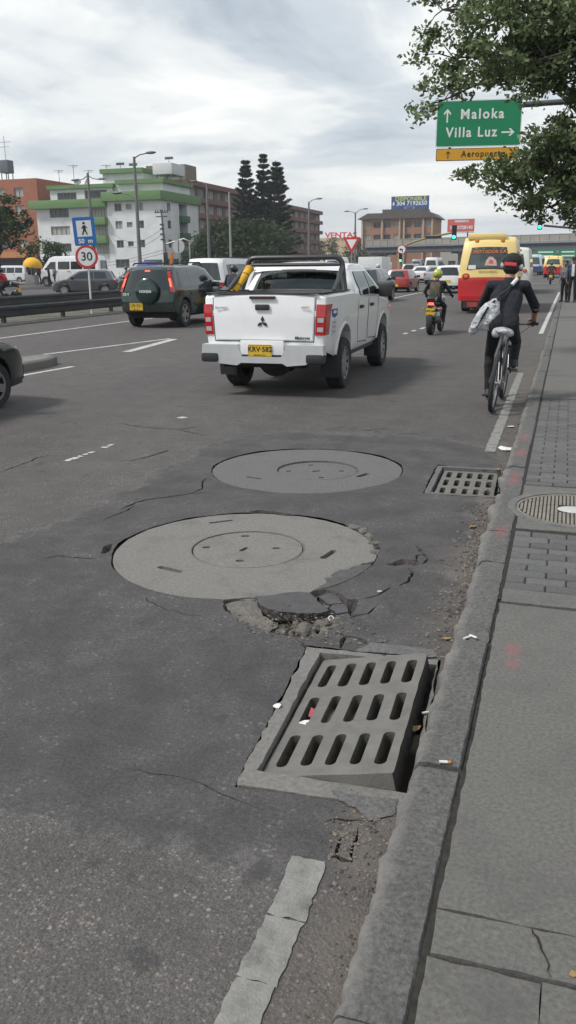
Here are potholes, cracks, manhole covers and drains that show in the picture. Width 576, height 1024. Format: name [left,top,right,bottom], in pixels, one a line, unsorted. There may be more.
manhole cover [111,514,377,601]
pothole [223,589,360,653]
crack [125,768,260,809]
crack [106,479,206,519]
drain grate [425,466,503,498]
manhole cover [211,449,403,493]
crack [297,547,429,653]
drain grate [237,643,438,821]
